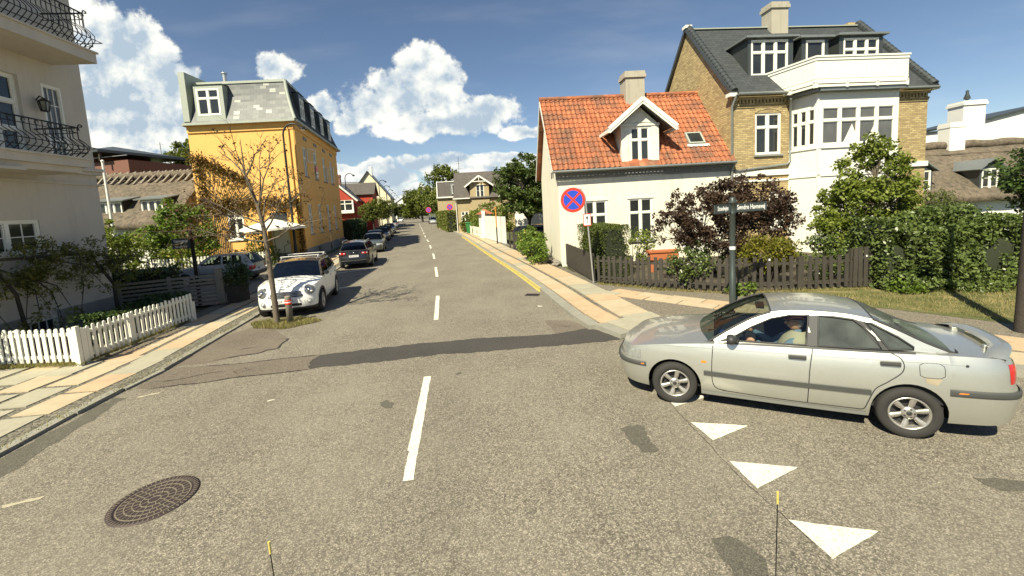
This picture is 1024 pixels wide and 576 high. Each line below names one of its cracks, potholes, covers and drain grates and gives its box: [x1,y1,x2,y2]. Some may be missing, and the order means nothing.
manhole cover [104,475,200,528]
